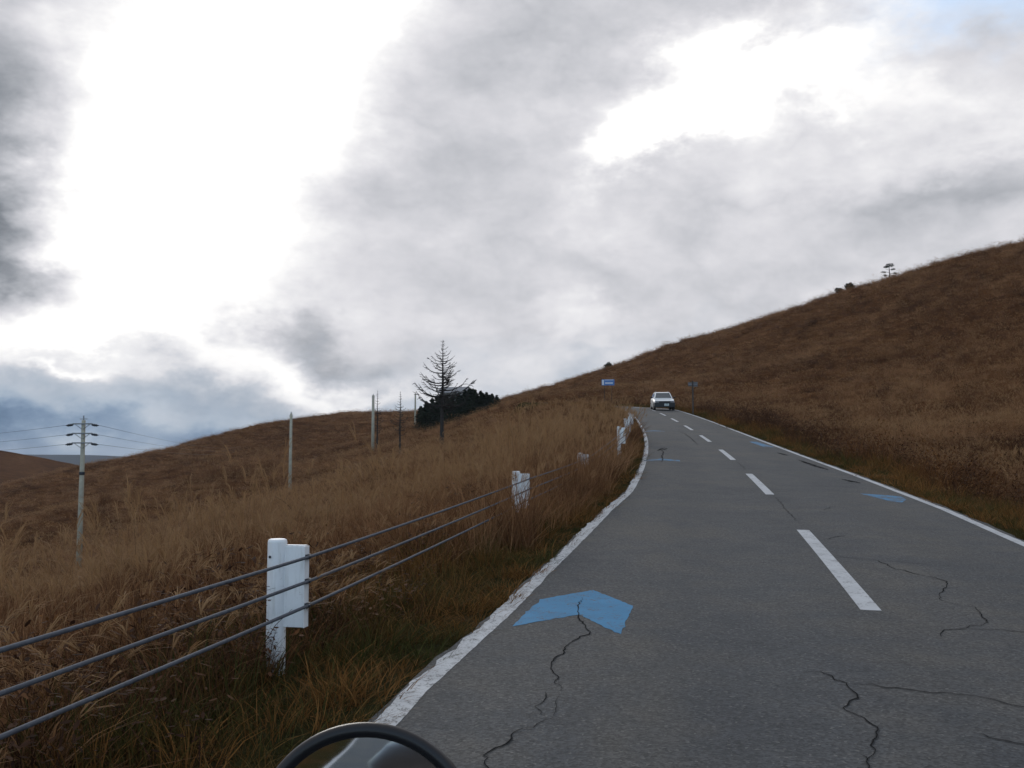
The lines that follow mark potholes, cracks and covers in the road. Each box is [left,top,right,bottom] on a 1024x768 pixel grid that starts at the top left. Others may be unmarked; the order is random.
crack [483,600,591,768]
crack [831,555,1023,637]
crack [802,671,1024,768]
